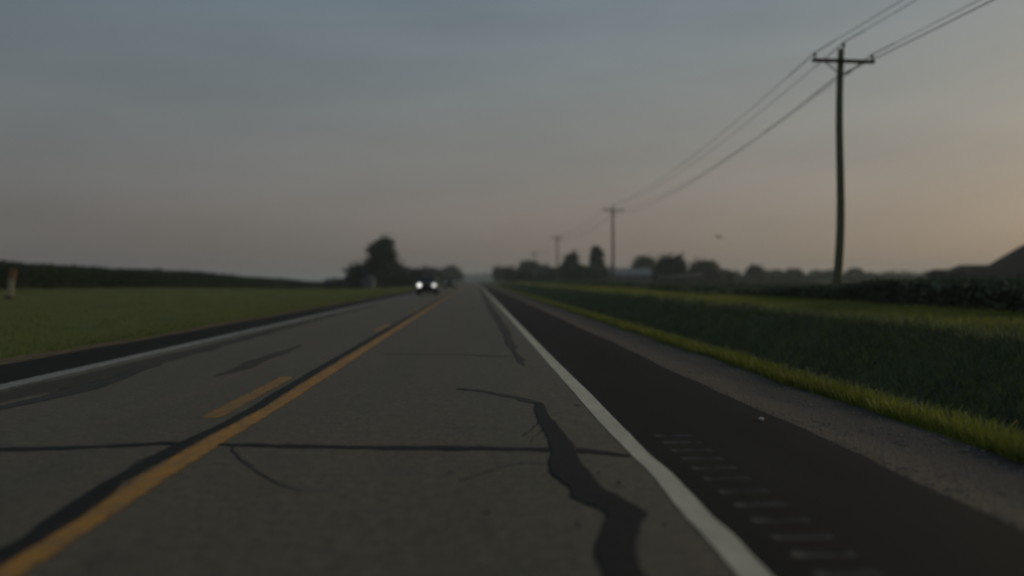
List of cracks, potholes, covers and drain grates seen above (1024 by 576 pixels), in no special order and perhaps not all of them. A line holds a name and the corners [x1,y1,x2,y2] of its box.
crack [231,446,299,490]
crack [456,388,537,404]
